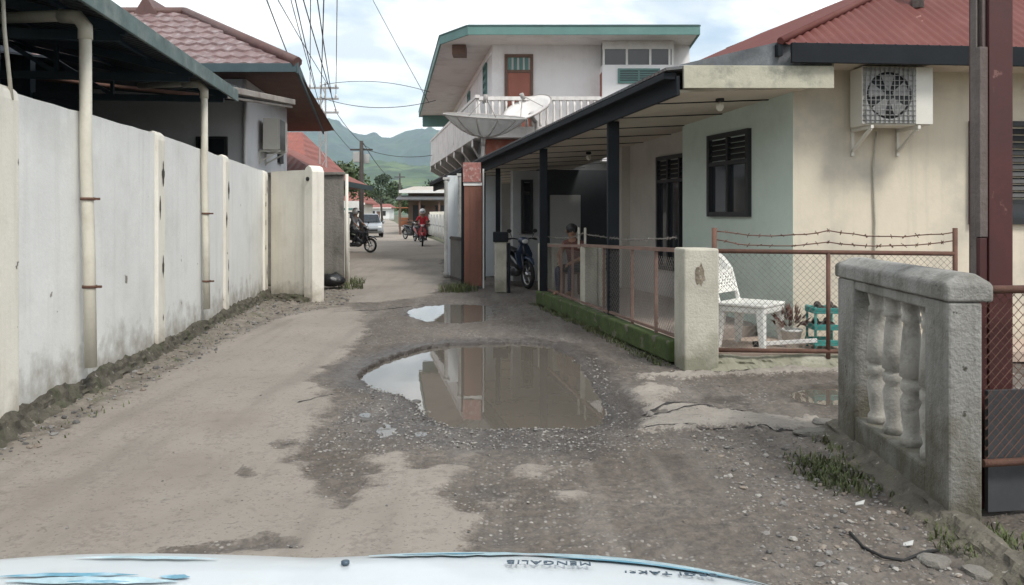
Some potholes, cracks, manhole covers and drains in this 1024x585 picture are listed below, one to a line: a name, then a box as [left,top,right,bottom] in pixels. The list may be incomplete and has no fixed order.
pothole [346,339,630,432]
crack [639,402,790,431]
pothole [774,385,838,406]
pothole [367,420,409,440]
pothole [404,303,498,324]
